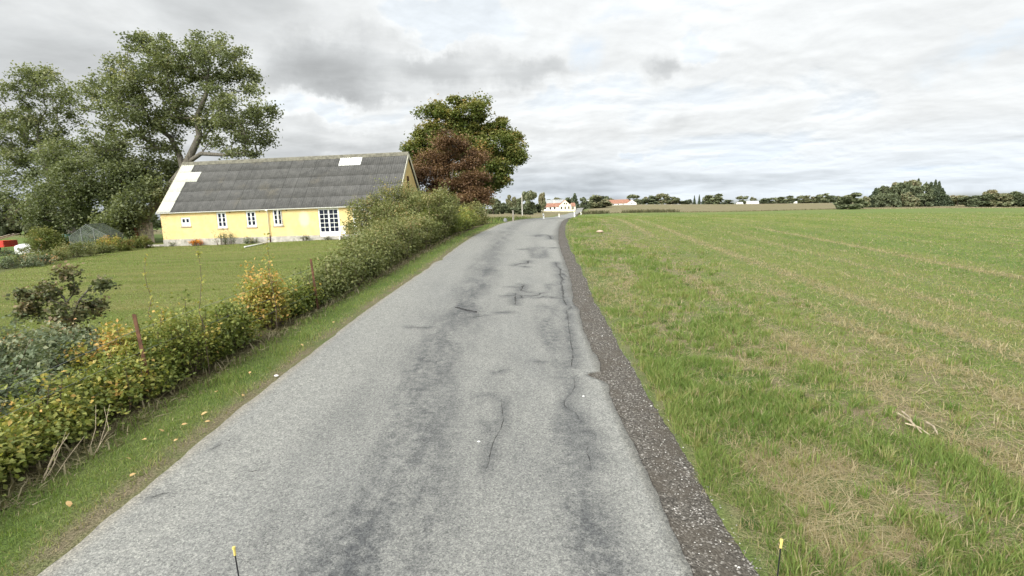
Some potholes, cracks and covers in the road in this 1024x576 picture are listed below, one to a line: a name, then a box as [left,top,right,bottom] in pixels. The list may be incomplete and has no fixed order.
crack [502,262,574,365]
